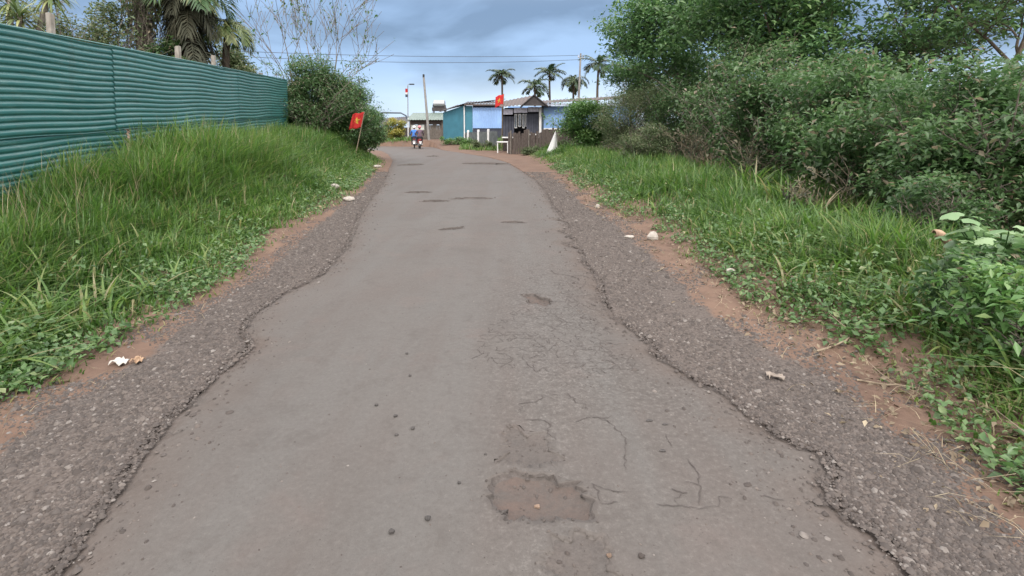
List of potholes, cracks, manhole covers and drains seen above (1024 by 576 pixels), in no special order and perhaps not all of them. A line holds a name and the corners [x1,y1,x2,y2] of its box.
pothole [480,468,600,527]
crack [473,270,635,378]
crack [657,459,730,509]
pothole [521,293,555,307]
crack [519,394,627,470]
